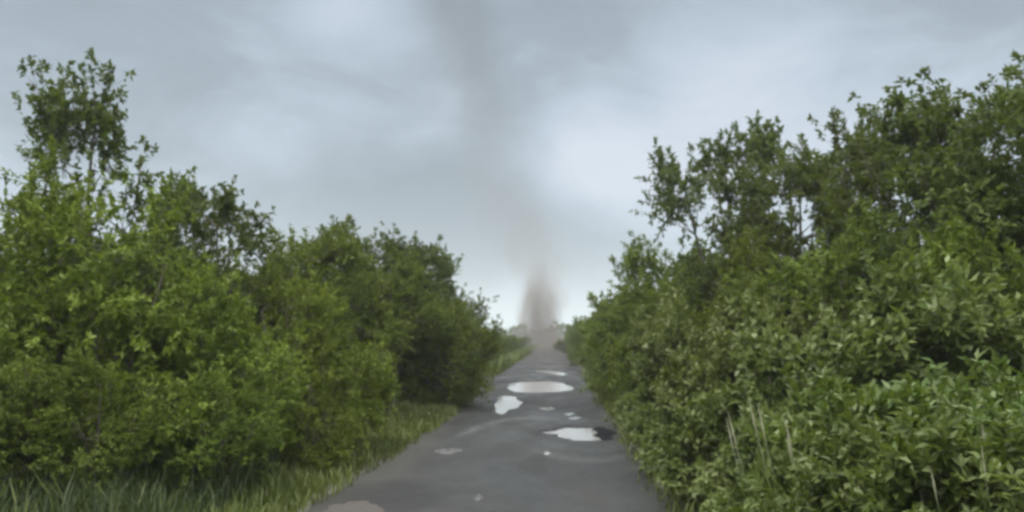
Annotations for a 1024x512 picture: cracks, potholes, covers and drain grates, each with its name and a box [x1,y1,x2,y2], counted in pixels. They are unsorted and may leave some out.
pothole [494,395,524,414]
pothole [507,381,574,393]
pothole [322,500,386,512]
pothole [540,426,618,441]
